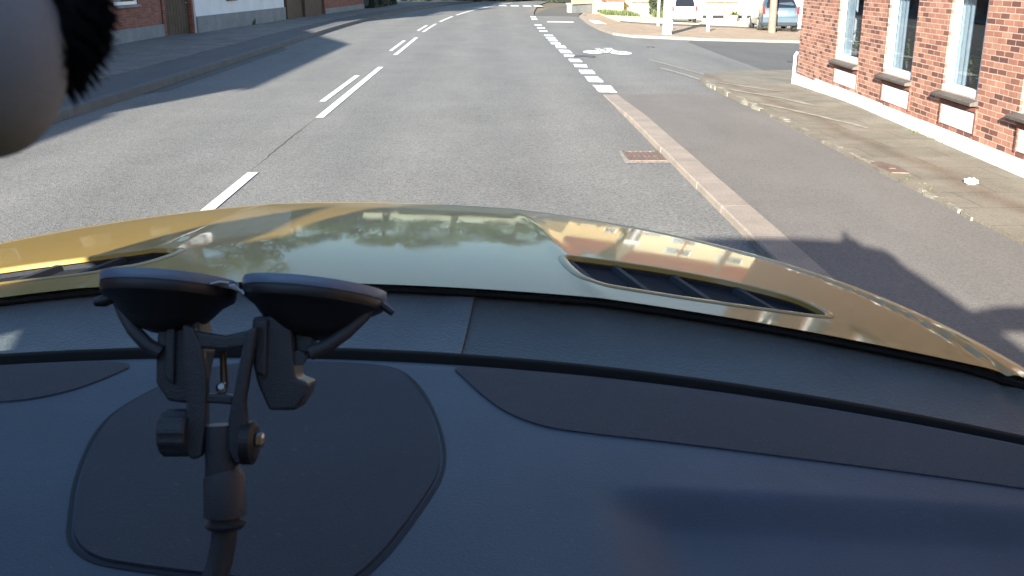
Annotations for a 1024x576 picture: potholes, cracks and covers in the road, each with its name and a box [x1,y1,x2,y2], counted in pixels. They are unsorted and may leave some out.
utility cover [870,161,909,174]
